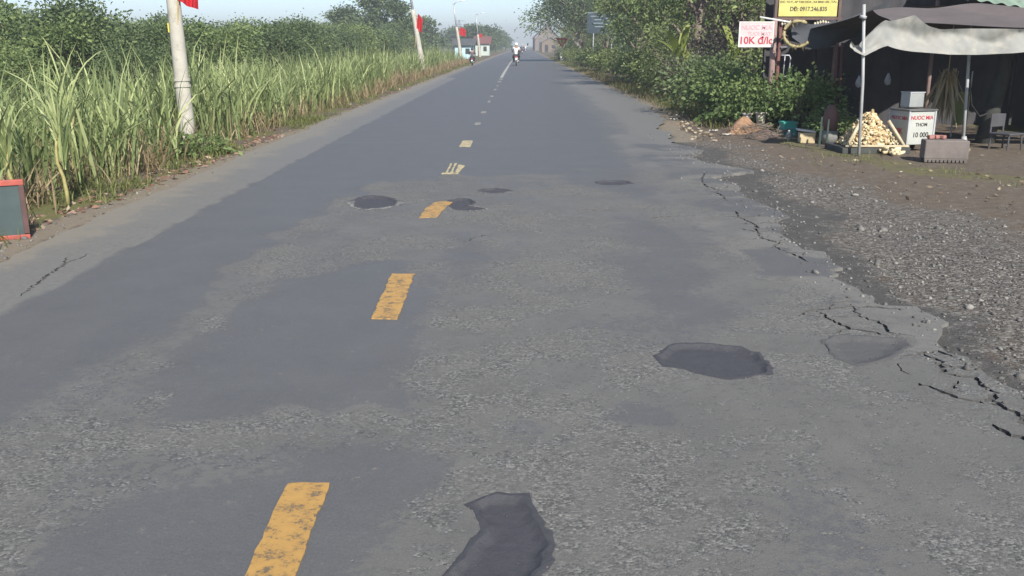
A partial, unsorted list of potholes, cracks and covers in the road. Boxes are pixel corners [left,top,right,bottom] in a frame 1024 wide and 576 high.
crack [698,172,823,264]
pothole [442,492,556,576]
pothole [653,342,774,379]
crack [21,254,87,296]
pothole [347,195,405,210]
pothole [446,198,488,211]
pothole [820,334,915,366]
crack [799,301,1024,440]
